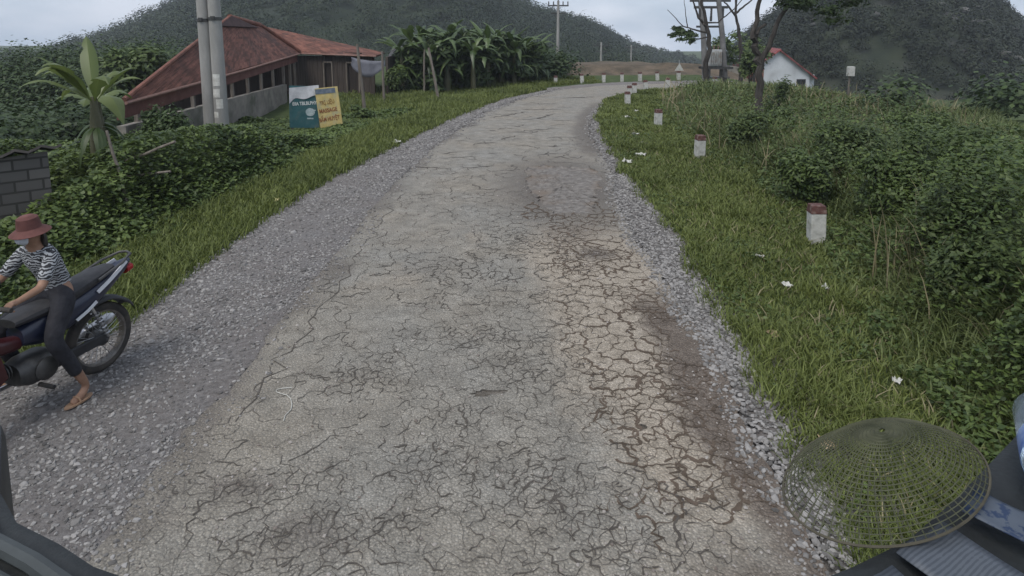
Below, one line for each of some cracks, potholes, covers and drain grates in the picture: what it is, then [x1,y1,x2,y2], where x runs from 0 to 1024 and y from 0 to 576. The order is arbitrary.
pothole [470,389,508,397]
crack [116,214,777,576]
crack [405,93,616,195]
